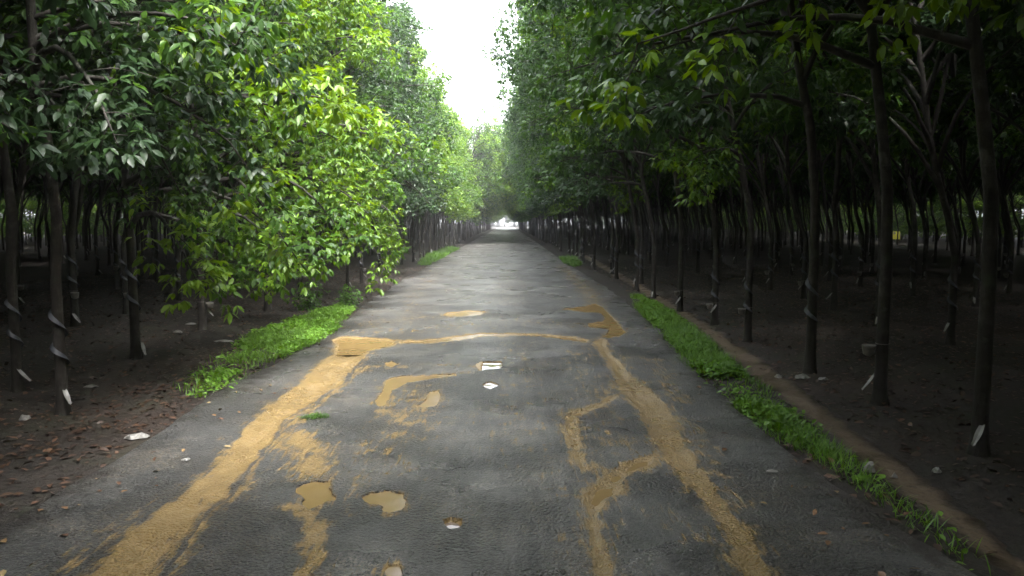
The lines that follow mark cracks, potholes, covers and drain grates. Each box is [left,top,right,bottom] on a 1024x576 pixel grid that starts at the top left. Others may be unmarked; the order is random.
pothole [361,489,407,513]
pothole [295,480,337,512]
pothole [475,361,503,371]
pothole [384,564,403,576]
pothole [442,517,465,529]
